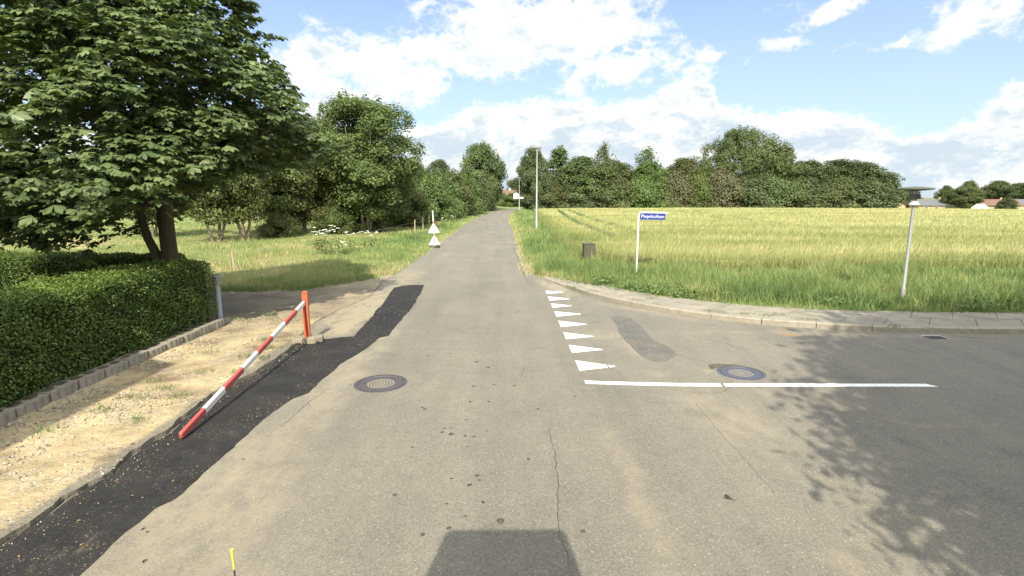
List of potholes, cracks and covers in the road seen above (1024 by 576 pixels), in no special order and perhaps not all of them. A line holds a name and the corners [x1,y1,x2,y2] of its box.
manhole cover [716,366,766,380]
crack [549,414,569,566]
manhole cover [354,375,408,393]
